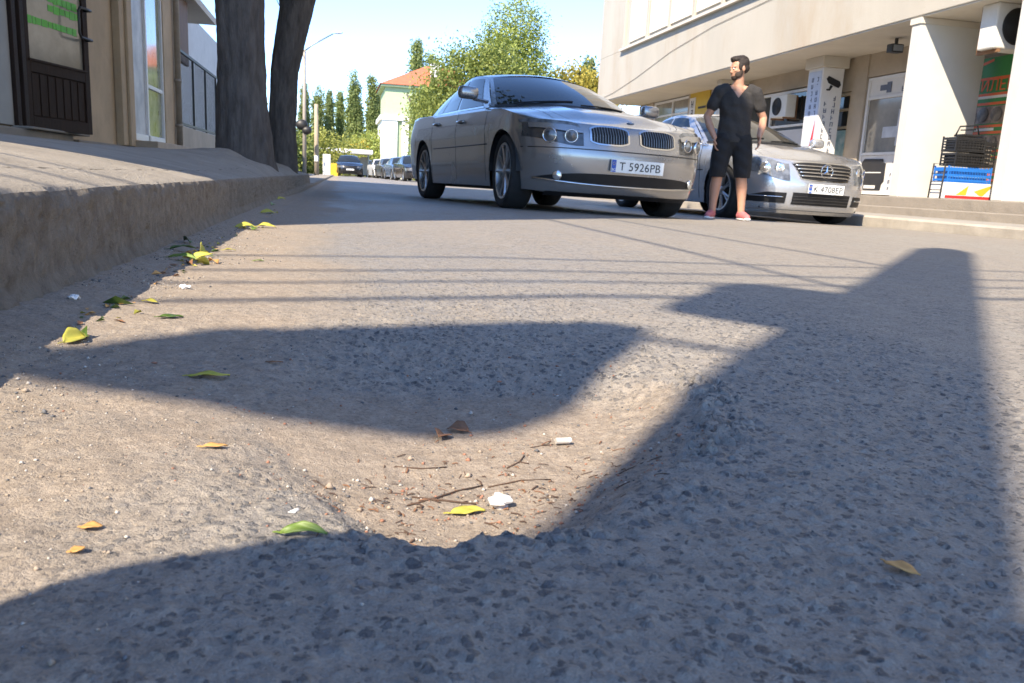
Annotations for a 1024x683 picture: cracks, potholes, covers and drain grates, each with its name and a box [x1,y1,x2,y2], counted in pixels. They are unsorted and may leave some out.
pothole [0,328,740,561]
